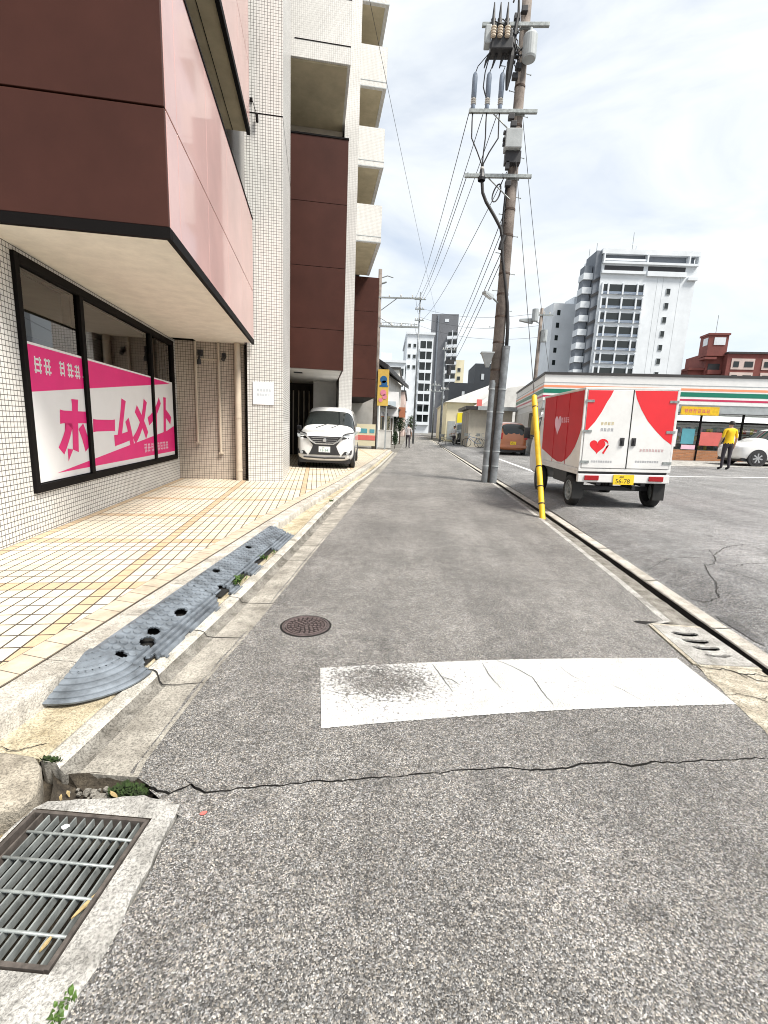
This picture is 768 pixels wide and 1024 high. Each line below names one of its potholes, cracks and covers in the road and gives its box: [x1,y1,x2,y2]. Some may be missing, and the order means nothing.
crack [646,544,764,602]
crack [149,757,768,797]
drain grate [0,795,180,1024]
manhole cover [280,615,331,637]
